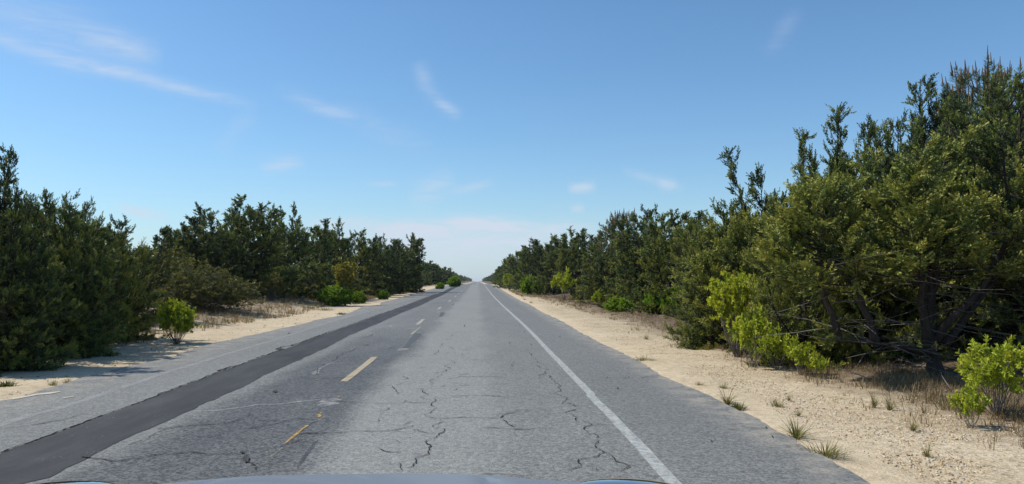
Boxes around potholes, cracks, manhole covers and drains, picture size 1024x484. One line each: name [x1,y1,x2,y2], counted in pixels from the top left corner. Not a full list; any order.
crack [339,336,633,471]
